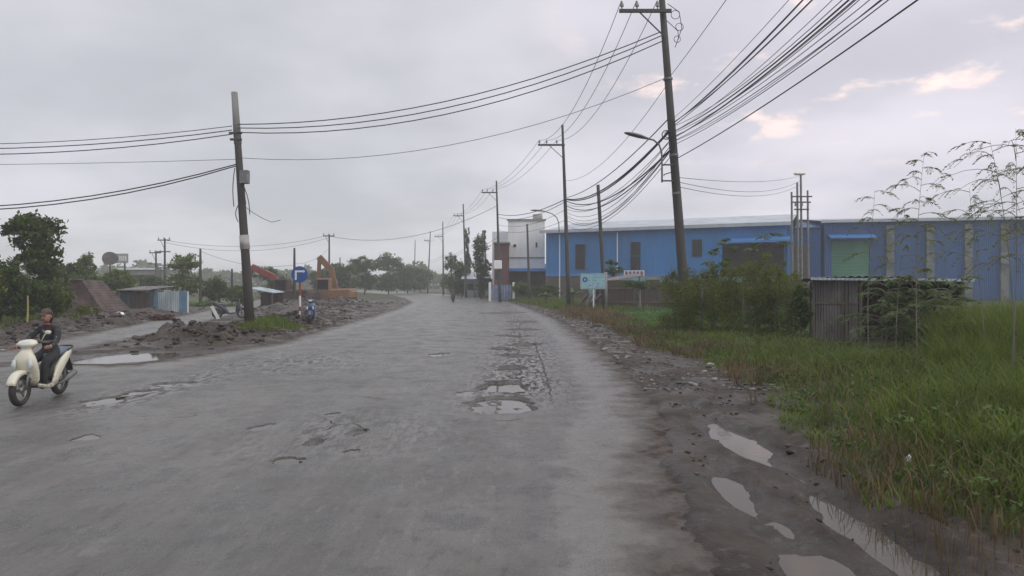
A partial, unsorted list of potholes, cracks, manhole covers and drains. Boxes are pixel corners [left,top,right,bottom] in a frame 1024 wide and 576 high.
pothole [115,388,164,399]
pothole [245,423,276,431]
pothole [460,395,538,414]
crack [312,419,367,434]
pothole [77,396,130,407]
pothole [476,380,528,393]
crack [534,341,554,403]
pothole [302,437,326,446]
pothole [269,456,306,466]
